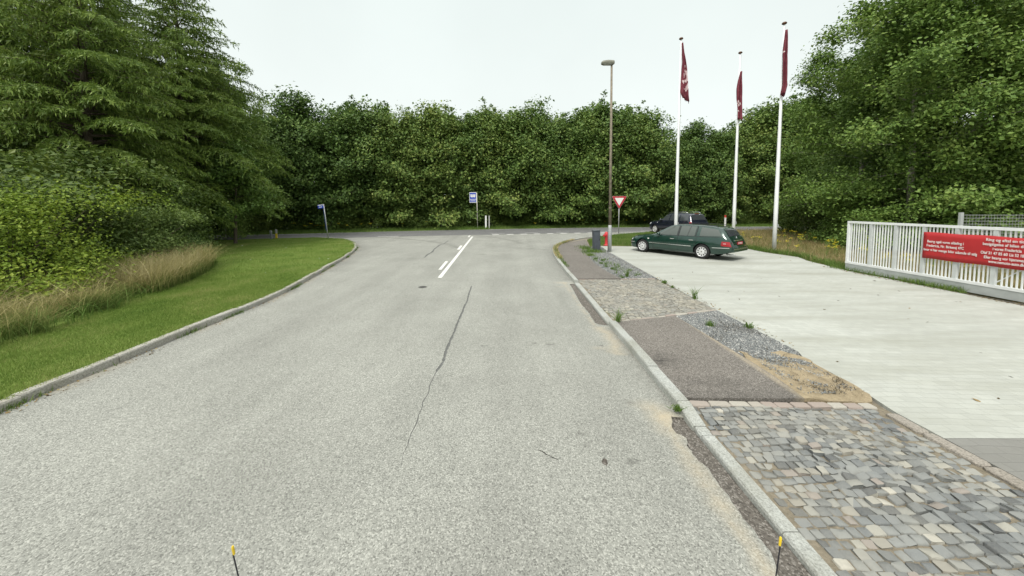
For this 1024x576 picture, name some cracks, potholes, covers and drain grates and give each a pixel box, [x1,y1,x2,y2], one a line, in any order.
crack [401,286,472,465]
